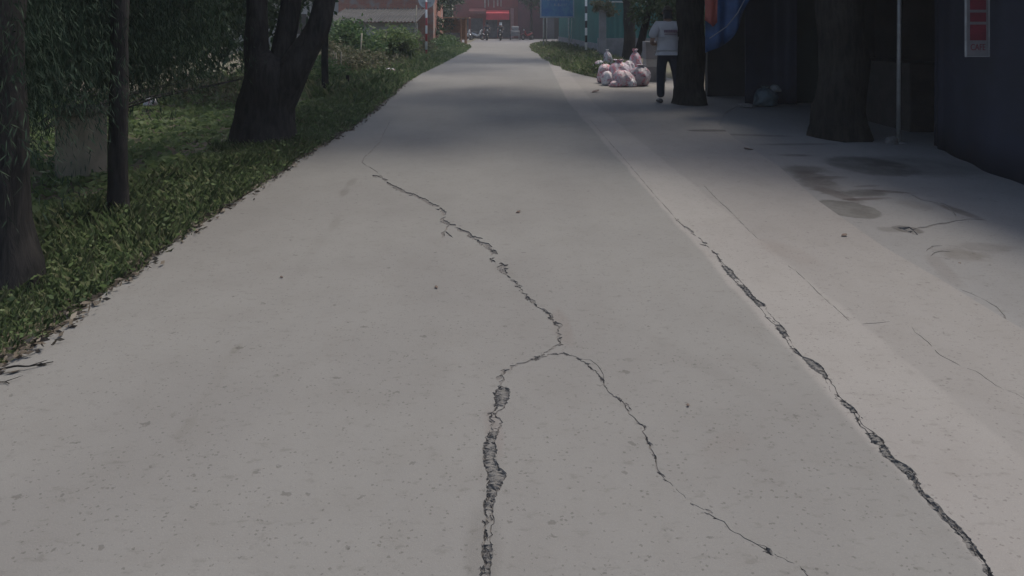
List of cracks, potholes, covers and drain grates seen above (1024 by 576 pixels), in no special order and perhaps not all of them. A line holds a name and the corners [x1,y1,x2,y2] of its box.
crack [897,195,981,256]
crack [361,122,808,576]
